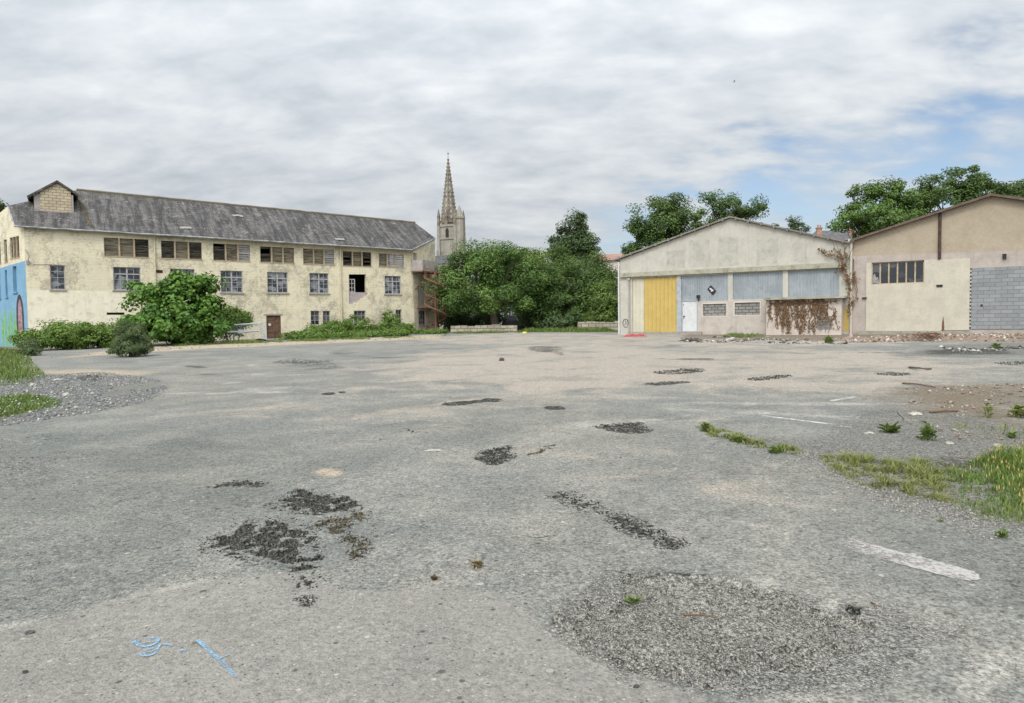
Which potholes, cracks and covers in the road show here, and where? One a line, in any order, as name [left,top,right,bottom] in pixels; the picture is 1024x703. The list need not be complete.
pothole [441,398,506,406]
pothole [291,594,320,608]
pothole [471,445,518,466]
pothole [304,509,376,535]
pothole [651,535,693,551]
pothole [261,488,367,515]
pothole [545,490,612,516]
pothole [334,534,375,561]
pothole [204,480,270,488]
pothole [194,517,332,591]
pothole [599,512,669,541]
pothole [591,421,655,434]
